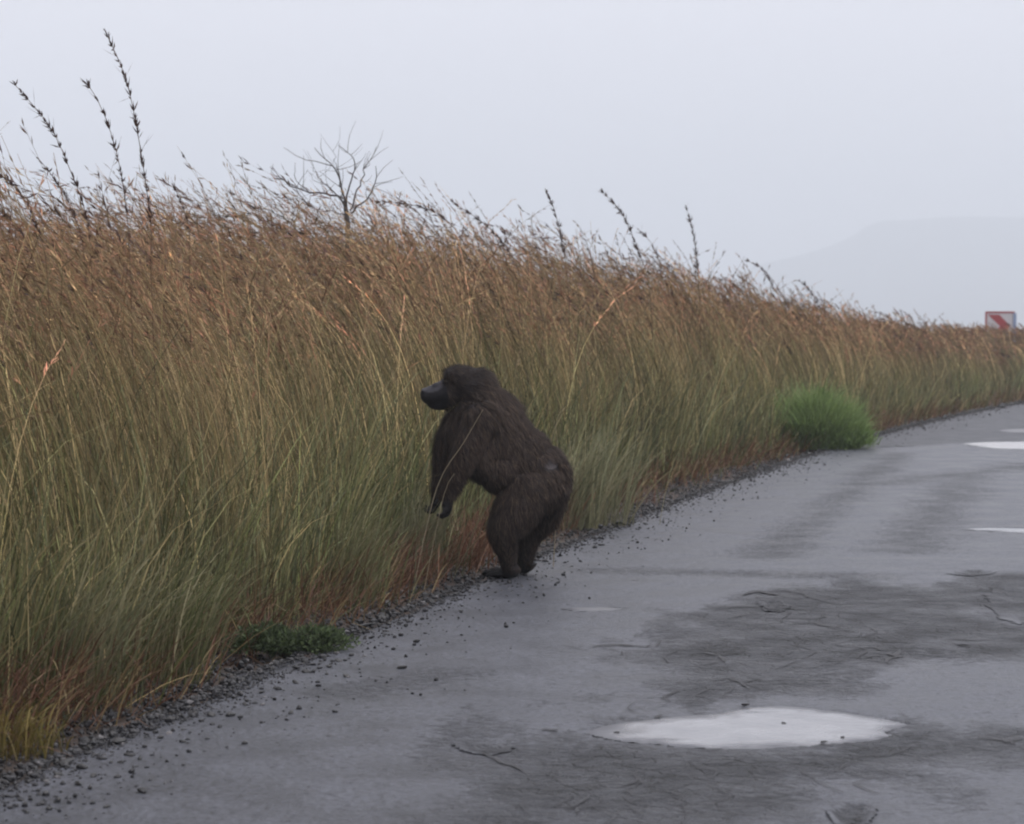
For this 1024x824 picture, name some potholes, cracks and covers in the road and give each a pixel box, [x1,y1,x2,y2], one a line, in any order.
pothole [585,706,910,749]
pothole [825,801,879,824]
crack [566,588,906,717]
crack [481,751,527,773]
